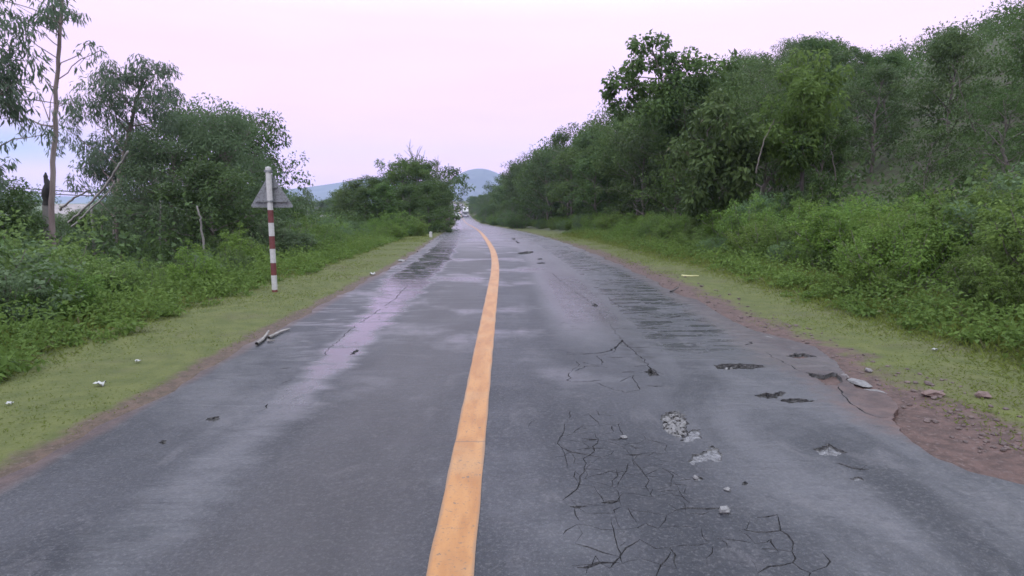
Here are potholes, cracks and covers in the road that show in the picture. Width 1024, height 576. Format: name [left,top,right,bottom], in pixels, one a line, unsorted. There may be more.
pothole [680,429,702,442]
crack [322,284,409,357]
crack [553,274,663,393]
crack [529,410,719,576]
pothole [813,444,848,456]
pothole [660,411,689,438]
pothole [688,446,723,466]
pothole [806,372,843,387]
pothole [754,391,786,399]
crack [707,515,831,576]
